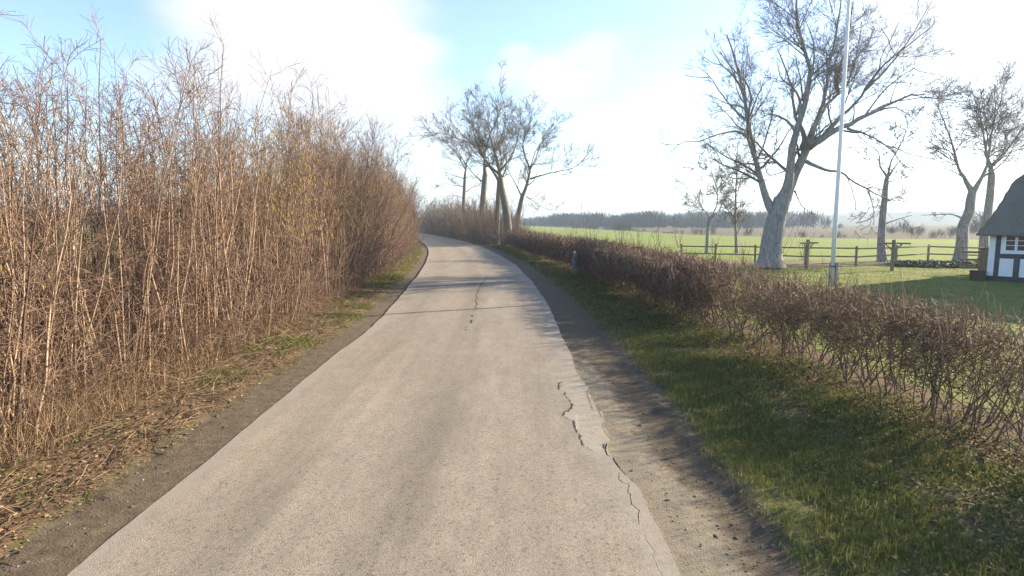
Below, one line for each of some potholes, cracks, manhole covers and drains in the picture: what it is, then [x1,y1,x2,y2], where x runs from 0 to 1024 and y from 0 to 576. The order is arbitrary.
crack [604,443,640,521]
